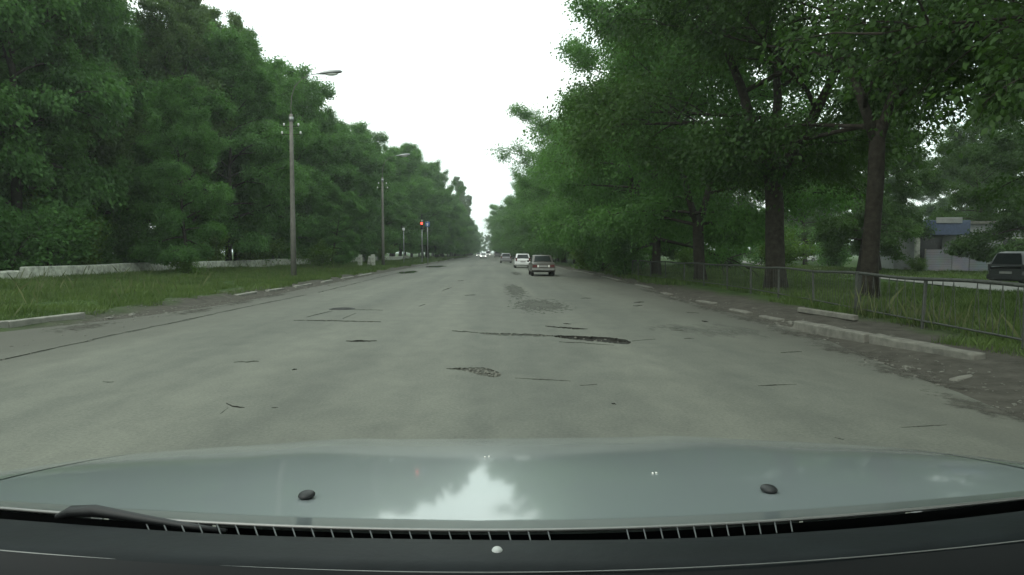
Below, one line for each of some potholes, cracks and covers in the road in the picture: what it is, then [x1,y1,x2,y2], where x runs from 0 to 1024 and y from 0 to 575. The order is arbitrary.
pothole [554,335,631,344]
pothole [446,367,501,377]
